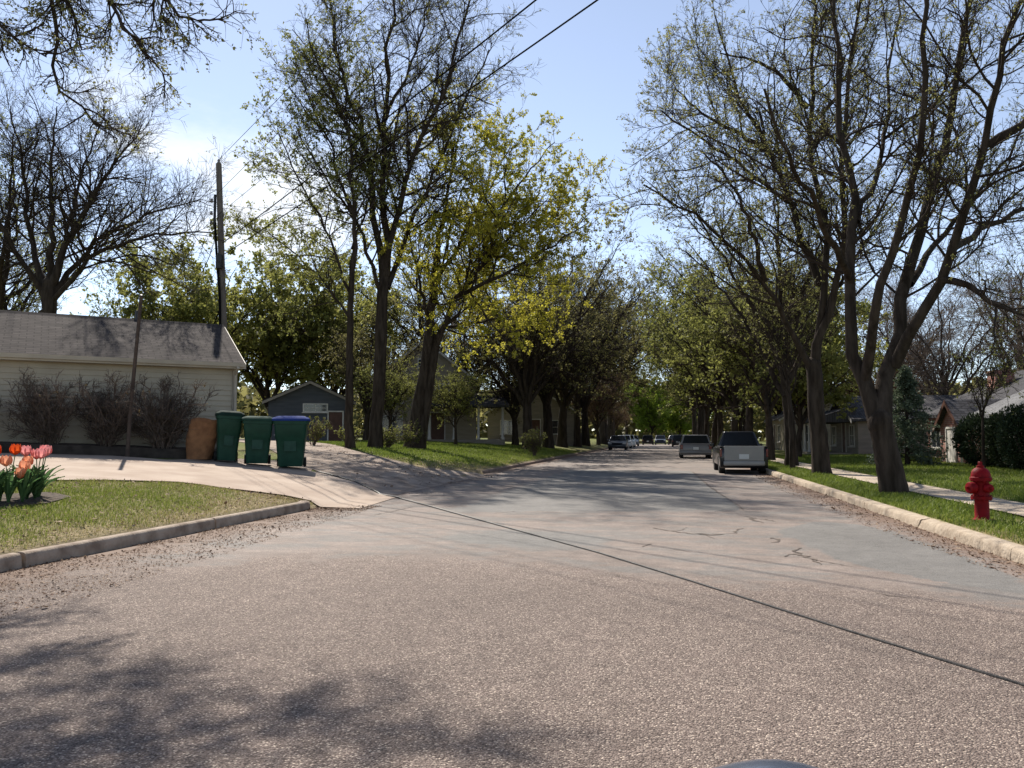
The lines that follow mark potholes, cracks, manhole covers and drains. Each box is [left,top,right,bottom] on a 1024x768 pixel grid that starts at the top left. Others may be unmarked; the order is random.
crack [642,515,848,566]
